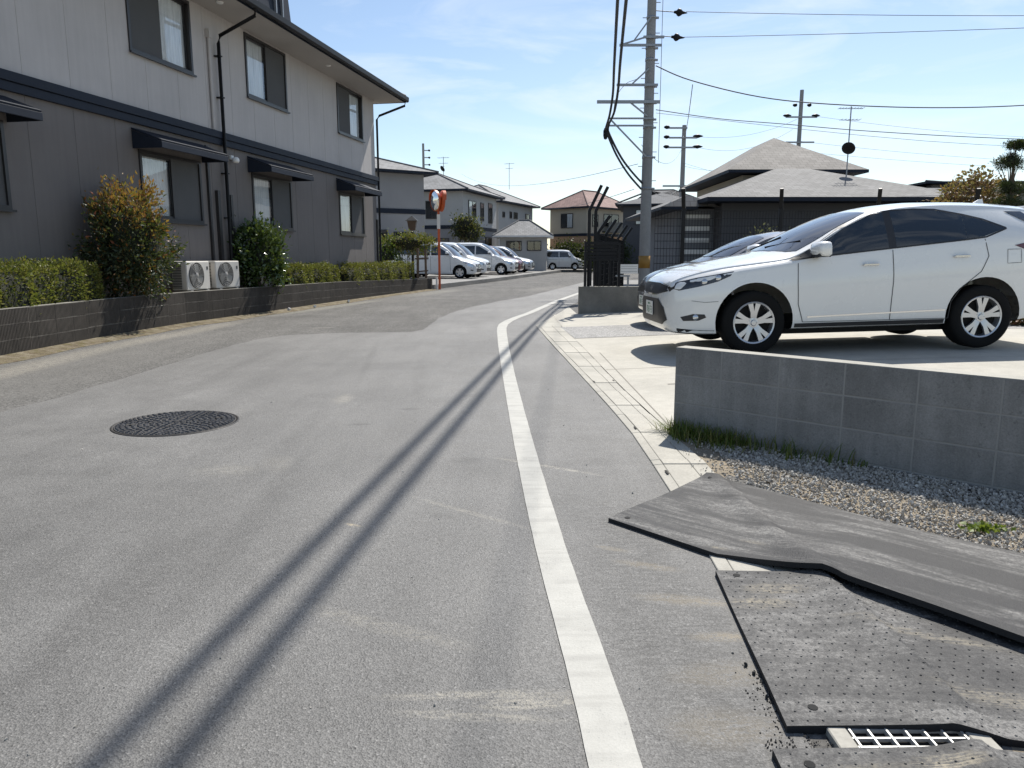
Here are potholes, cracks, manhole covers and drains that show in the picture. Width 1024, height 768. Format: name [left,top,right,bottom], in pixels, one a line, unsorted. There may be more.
drain grate [825,727,1003,750]
manhole cover [110,410,239,437]
